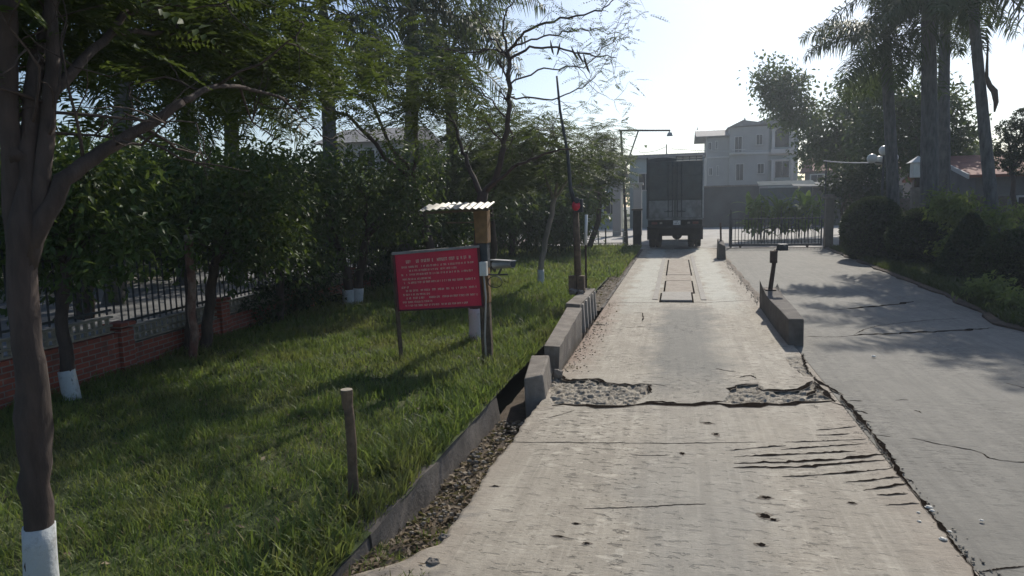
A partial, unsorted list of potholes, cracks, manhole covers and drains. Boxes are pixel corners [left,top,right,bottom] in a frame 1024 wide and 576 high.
pothole [725,384,831,404]
crack [698,301,1024,576]
pothole [550,378,648,405]
